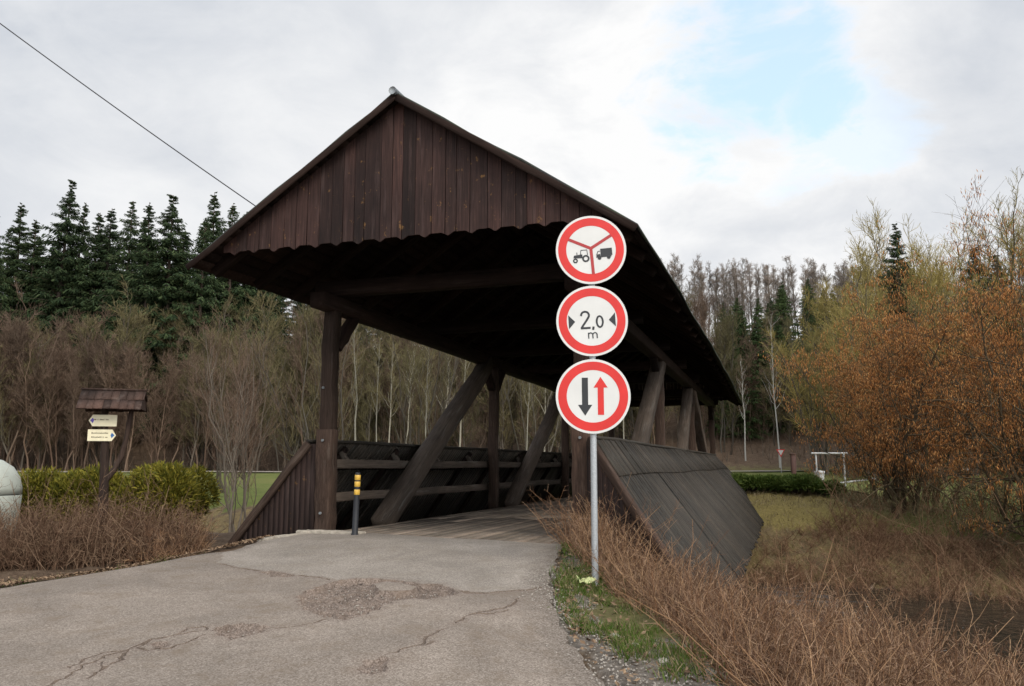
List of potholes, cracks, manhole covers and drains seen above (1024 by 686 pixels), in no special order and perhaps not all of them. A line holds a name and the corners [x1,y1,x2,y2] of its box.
pothole [296,578,459,620]
pothole [212,623,269,640]
pothole [355,656,392,675]
crack [394,586,543,653]
crack [46,626,209,686]
